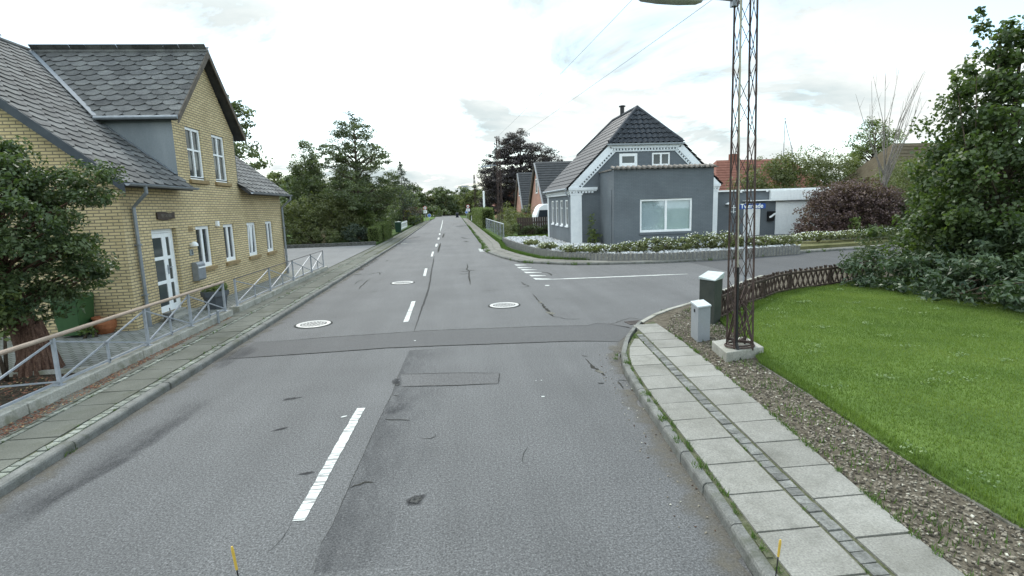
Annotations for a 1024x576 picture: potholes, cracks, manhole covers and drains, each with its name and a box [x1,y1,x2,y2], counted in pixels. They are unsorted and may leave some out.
manhole cover [294,320,333,329]
